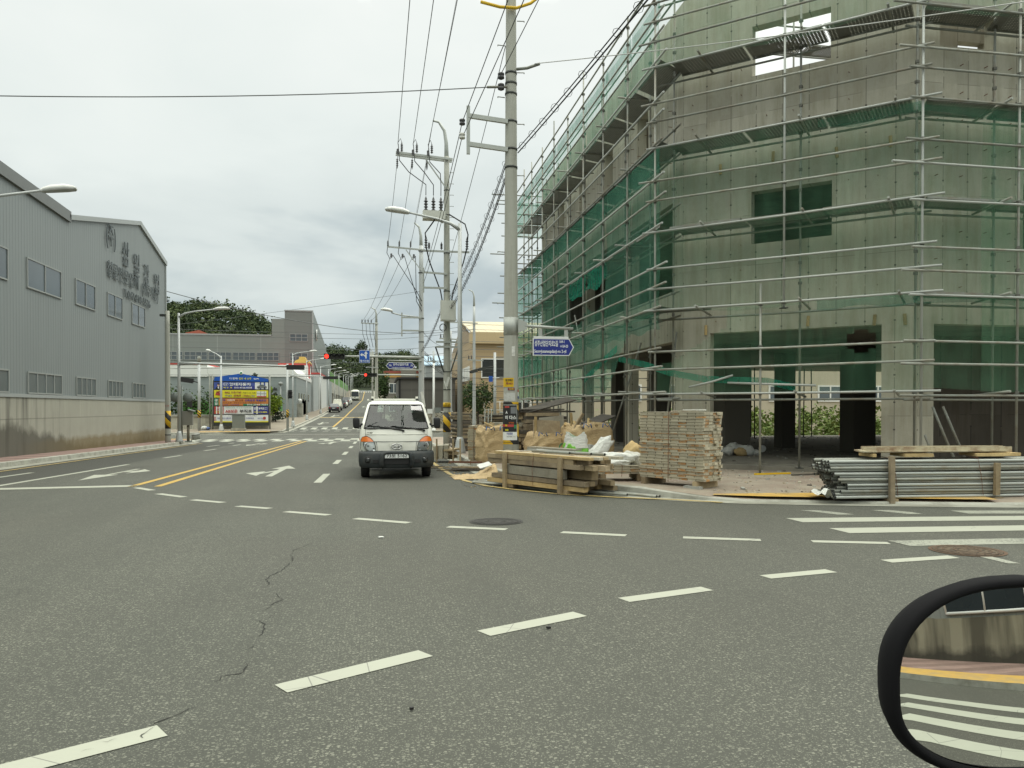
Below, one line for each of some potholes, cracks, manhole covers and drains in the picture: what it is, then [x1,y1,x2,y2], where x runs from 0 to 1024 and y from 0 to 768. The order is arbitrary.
manhole cover [928,545,1008,557]
crack [105,545,306,742]
